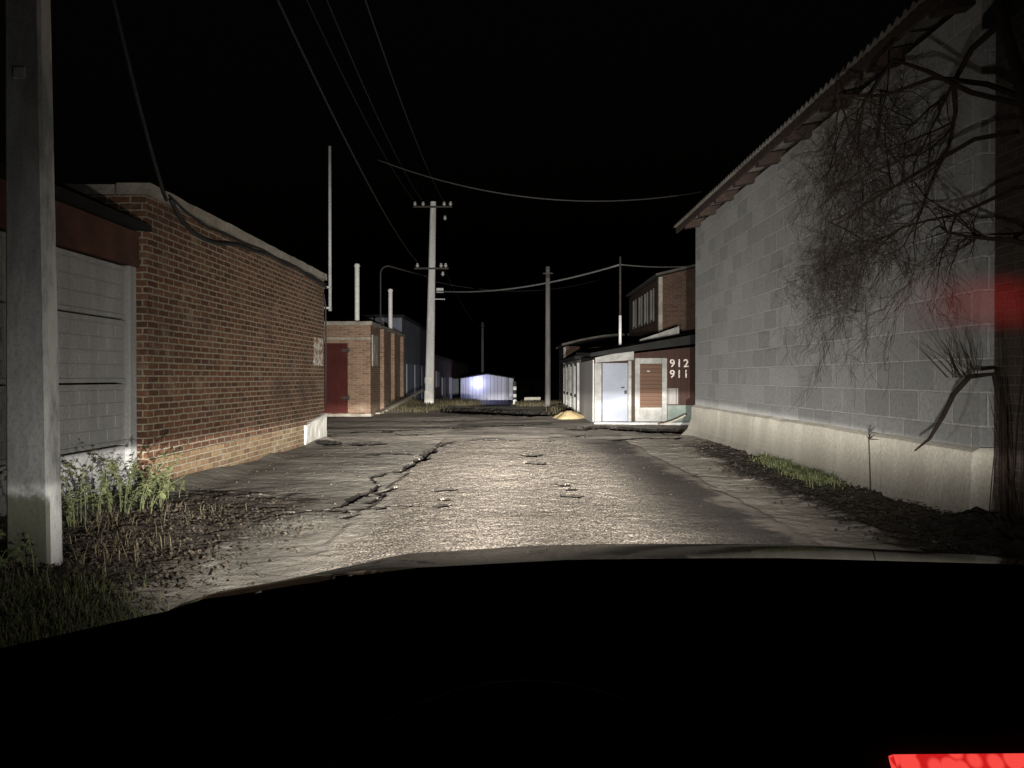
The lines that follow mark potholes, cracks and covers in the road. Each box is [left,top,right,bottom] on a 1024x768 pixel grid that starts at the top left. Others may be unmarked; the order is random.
crack [259,420,589,521]
